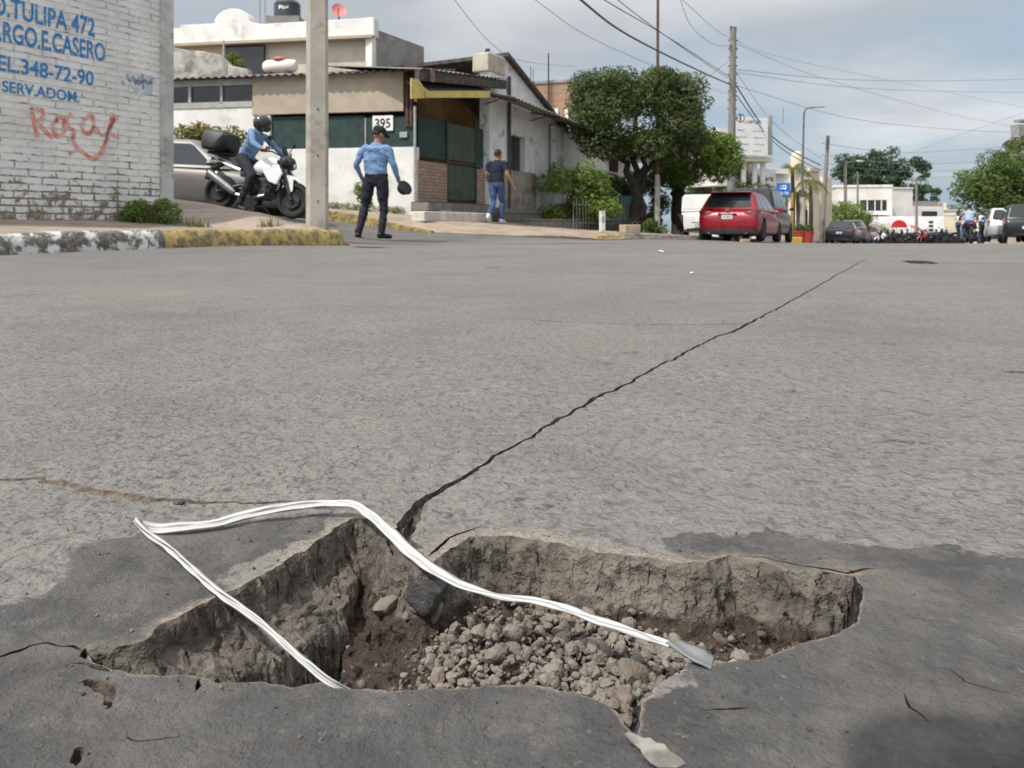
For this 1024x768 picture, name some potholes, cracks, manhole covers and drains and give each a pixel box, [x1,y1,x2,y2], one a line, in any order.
crack [903,666,1020,722]
pothole [85,518,864,734]
crack [0,642,116,709]
